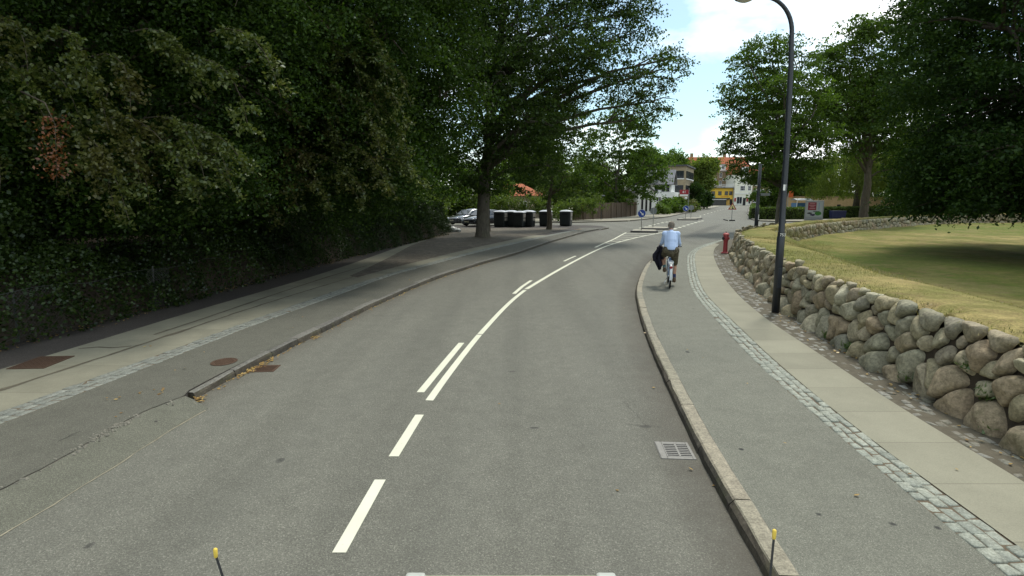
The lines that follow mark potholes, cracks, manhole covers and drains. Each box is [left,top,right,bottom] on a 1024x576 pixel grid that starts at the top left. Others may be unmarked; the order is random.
manhole cover [210,358,238,366]
crack [0,396,184,491]
manhole cover [6,356,74,369]
drain grate [654,441,697,460]
